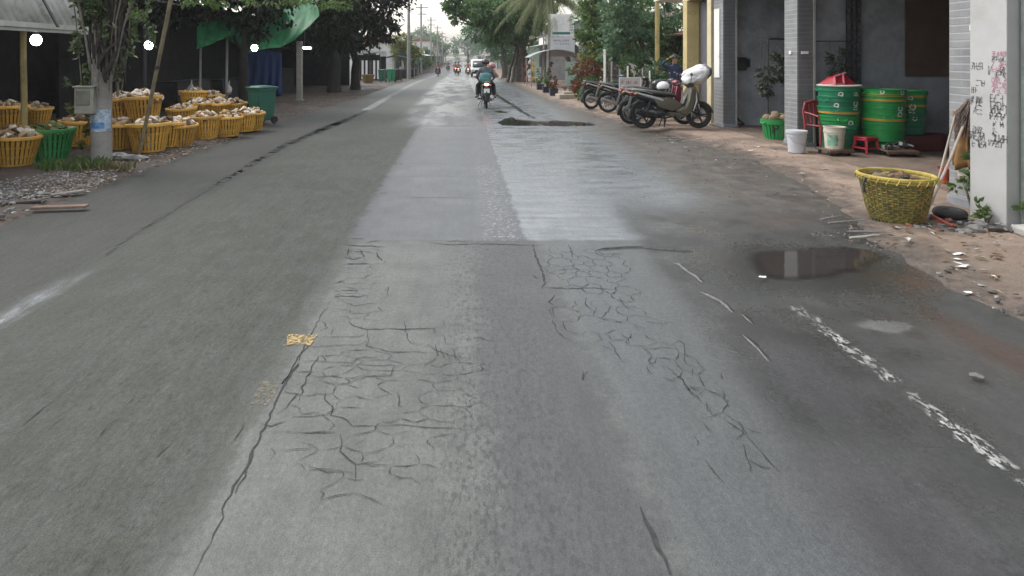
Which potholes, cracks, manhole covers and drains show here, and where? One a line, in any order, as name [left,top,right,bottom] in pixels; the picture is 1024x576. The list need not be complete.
crack [193,238,501,576]
crack [533,244,868,566]
pothole [497,117,596,127]
